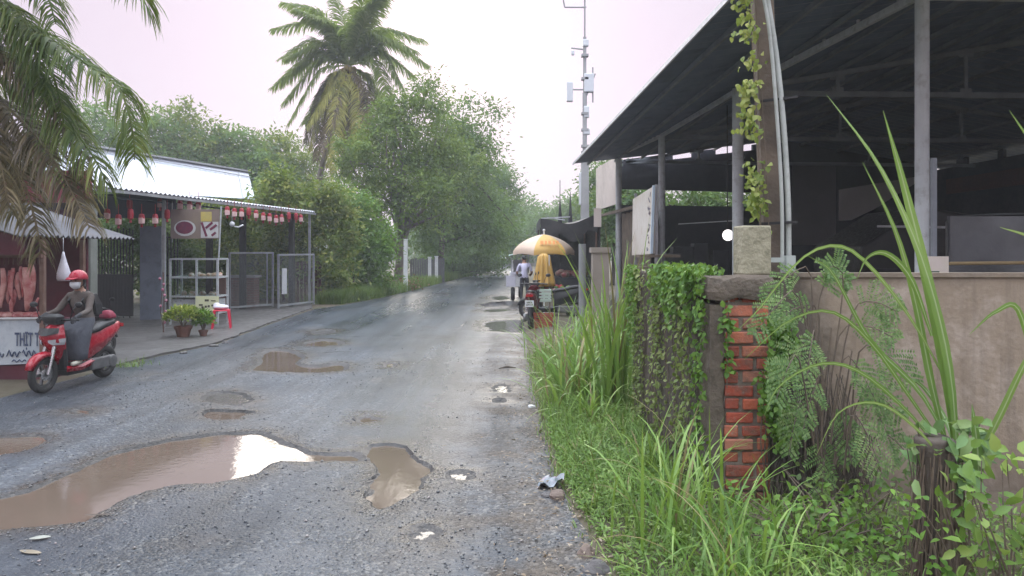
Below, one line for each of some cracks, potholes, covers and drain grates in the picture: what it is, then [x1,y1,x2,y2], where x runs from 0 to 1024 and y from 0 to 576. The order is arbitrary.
pothole [443,469,476,481]
pothole [0,431,367,530]
pothole [407,523,444,543]
pothole [491,384,512,393]
pothole [481,320,525,333]
pothole [363,443,435,509]
pothole [248,348,350,372]
pothole [355,414,384,423]
pothole [202,409,256,420]
pothole [200,390,255,406]
